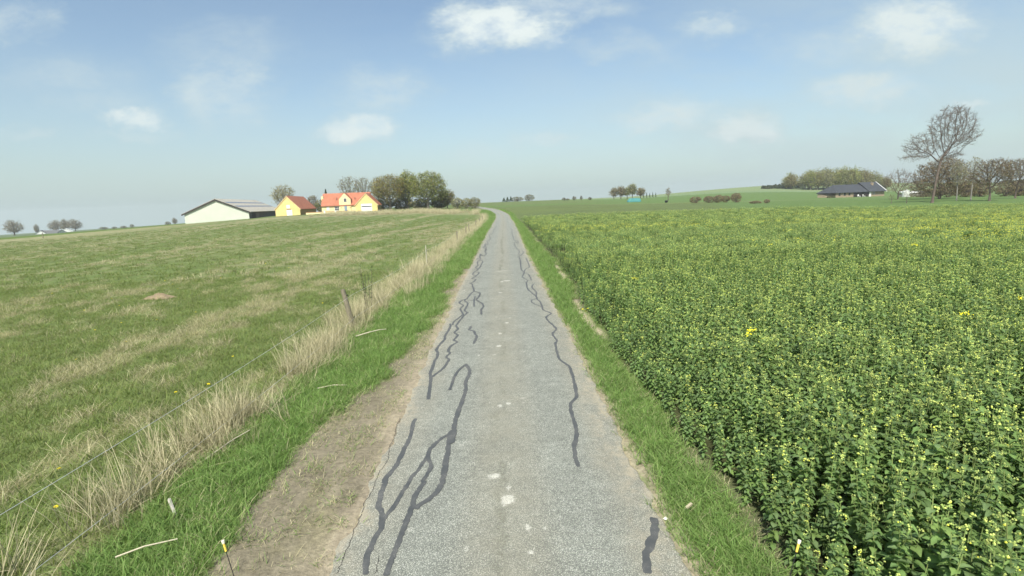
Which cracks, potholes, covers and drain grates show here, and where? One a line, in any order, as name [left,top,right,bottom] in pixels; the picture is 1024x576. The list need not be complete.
crack [337,418,400,573]
